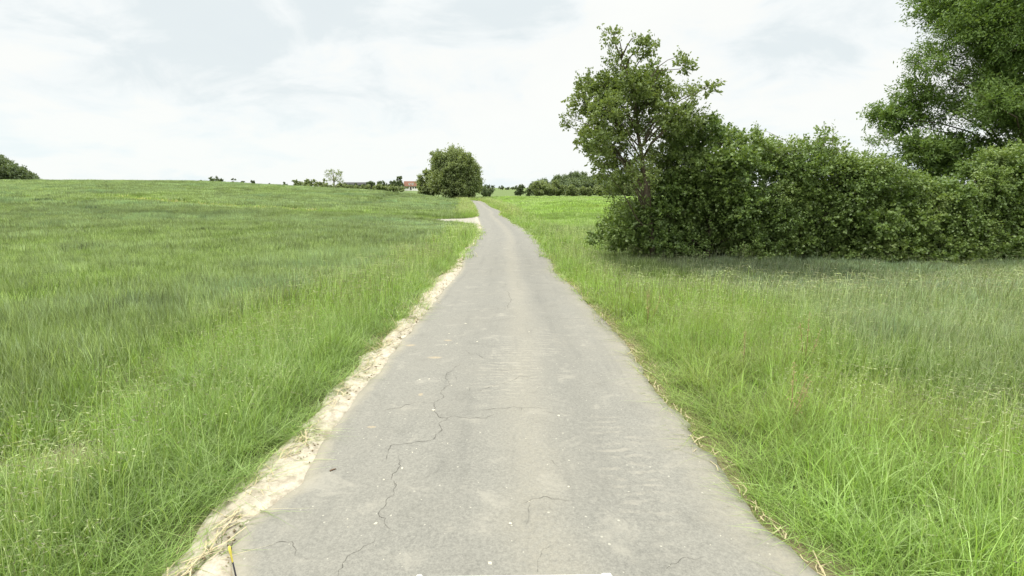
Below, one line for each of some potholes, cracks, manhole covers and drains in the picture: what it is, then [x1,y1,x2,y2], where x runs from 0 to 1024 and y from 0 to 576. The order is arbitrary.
crack [338,371,551,572]
